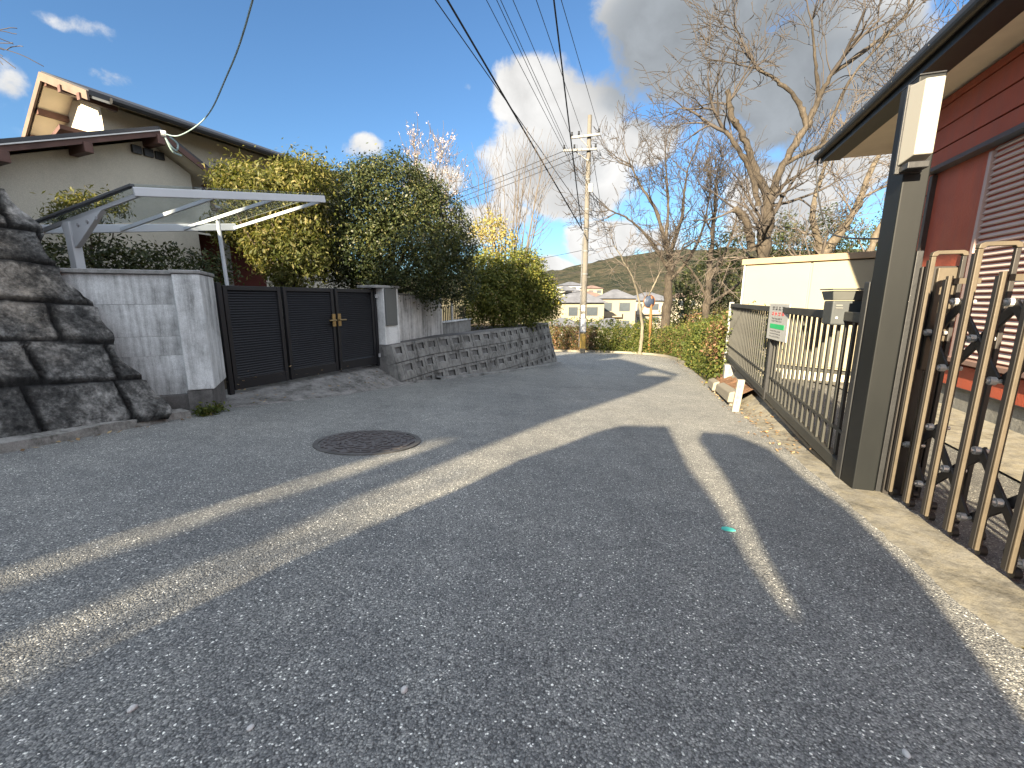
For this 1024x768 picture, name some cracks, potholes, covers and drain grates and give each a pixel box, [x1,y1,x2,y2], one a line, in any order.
manhole cover [312,430,421,456]
